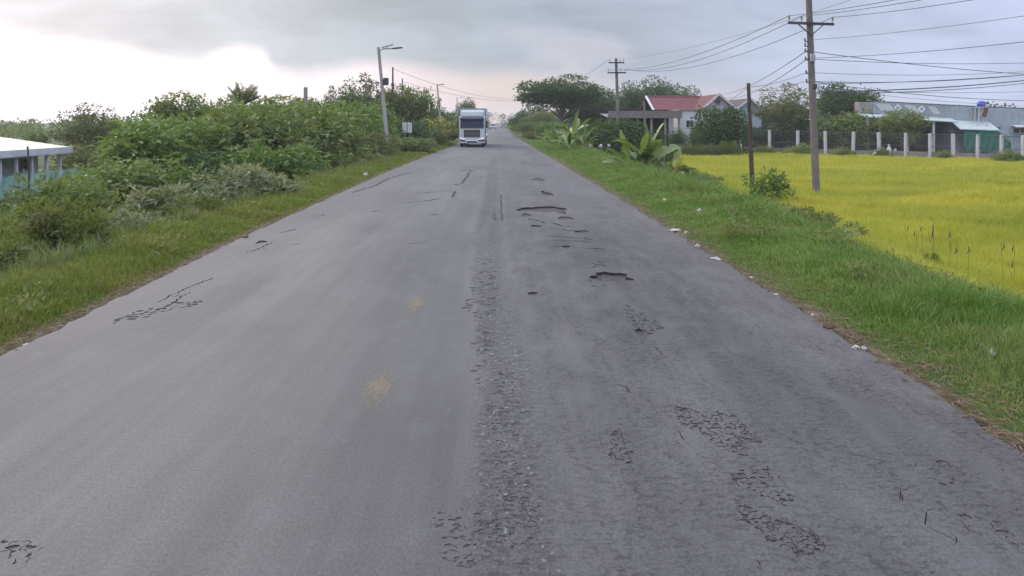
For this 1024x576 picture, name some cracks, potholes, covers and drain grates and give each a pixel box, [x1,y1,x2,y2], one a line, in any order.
crack [618,305,664,394]
crack [0,539,42,565]
pothole [589,272,634,282]
pothole [516,206,567,214]
crack [113,278,212,324]
crack [608,429,634,464]
crack [352,157,493,215]
crack [433,259,539,568]
crack [674,404,826,572]
crack [897,488,1023,550]
